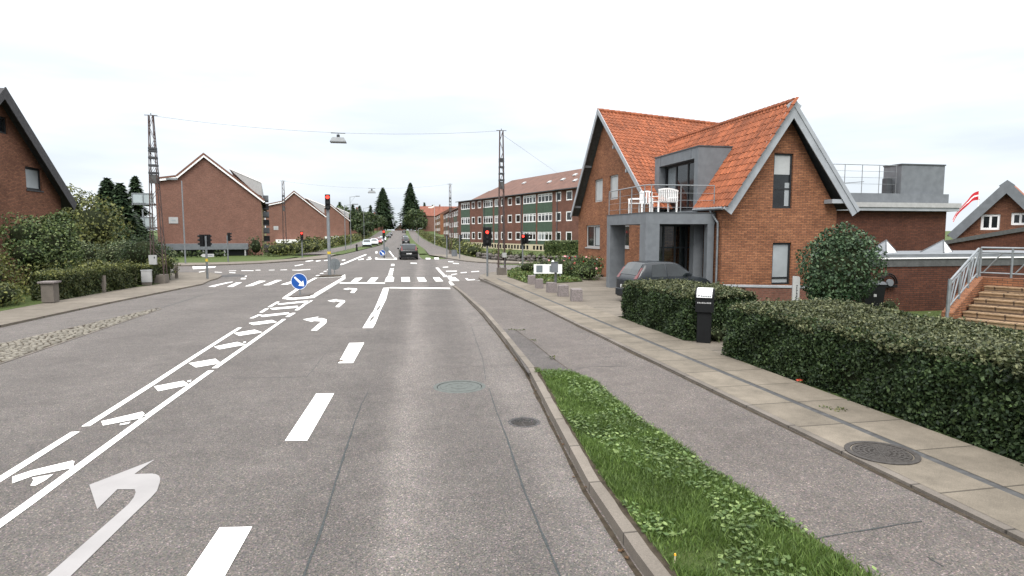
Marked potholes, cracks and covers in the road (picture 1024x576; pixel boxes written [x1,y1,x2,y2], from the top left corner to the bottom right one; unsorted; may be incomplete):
manhole cover [844,441,921,475]
manhole cover [433,380,485,393]
